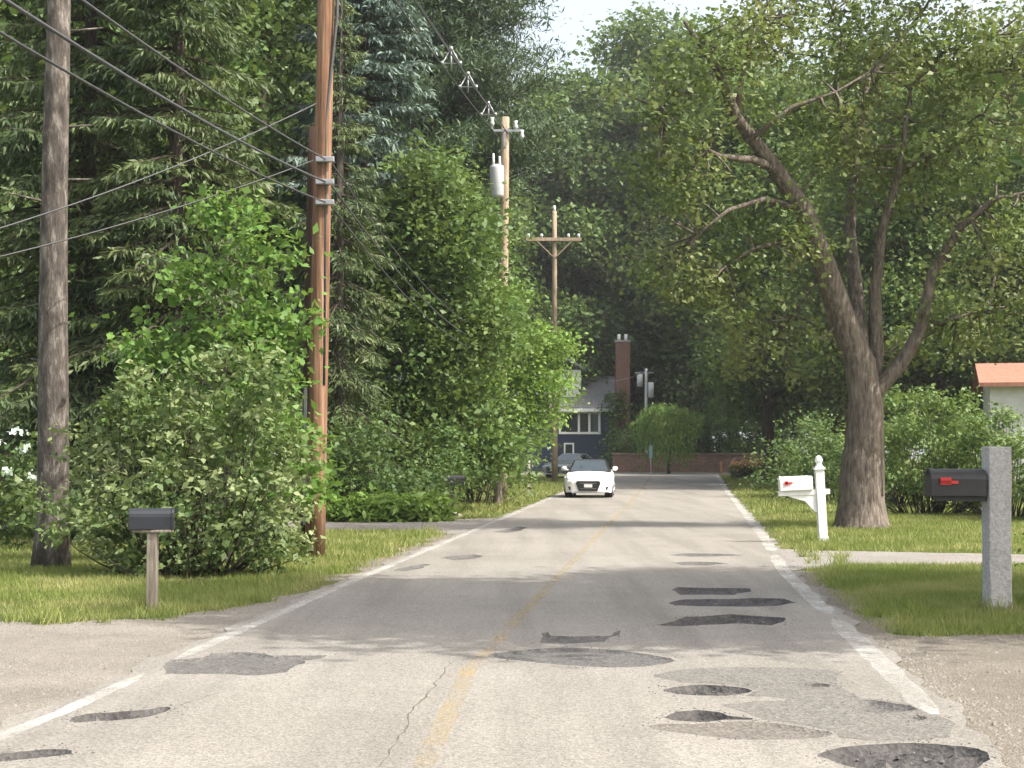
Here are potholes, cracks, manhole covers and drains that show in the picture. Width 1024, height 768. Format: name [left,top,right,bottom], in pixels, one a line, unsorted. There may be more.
pothole [669,598,795,607]
pothole [530,631,631,644]
pothole [648,708,777,723]
pothole [61,704,196,725]
pothole [0,743,95,762]
crack [378,662,451,767]
pothole [648,681,768,697]
pothole [672,587,751,595]
pothole [814,738,1003,768]
pothole [647,614,793,627]
